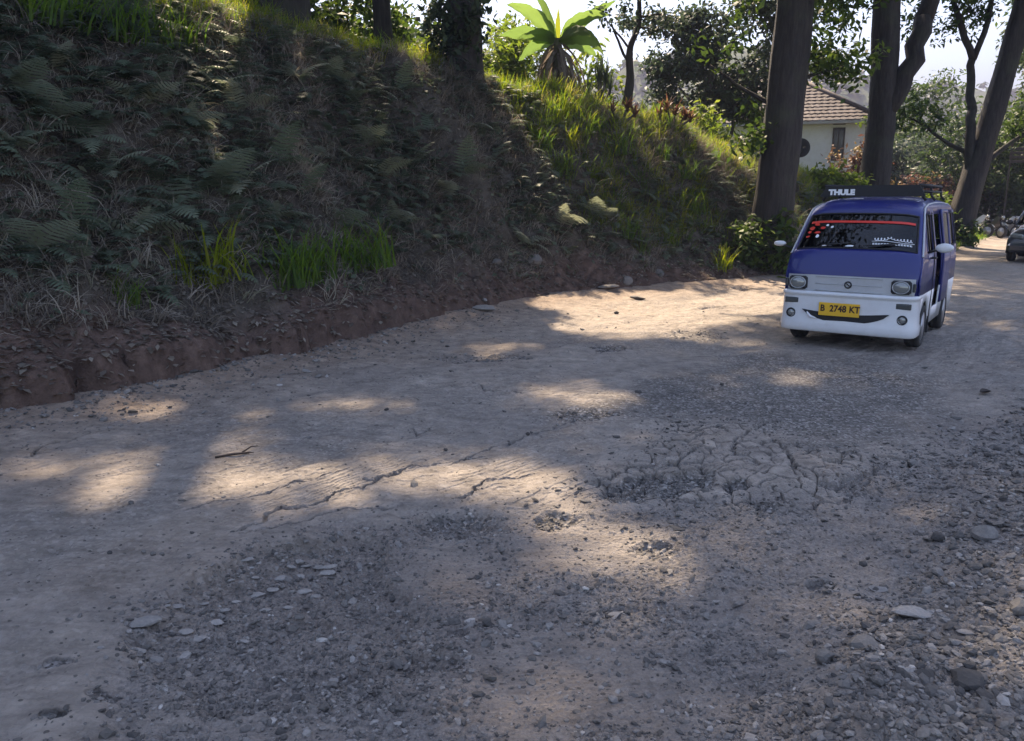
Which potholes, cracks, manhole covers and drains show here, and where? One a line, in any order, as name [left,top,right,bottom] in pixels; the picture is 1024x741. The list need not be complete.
crack [0,388,937,538]
pothole [525,511,593,532]
pothole [631,541,681,559]
